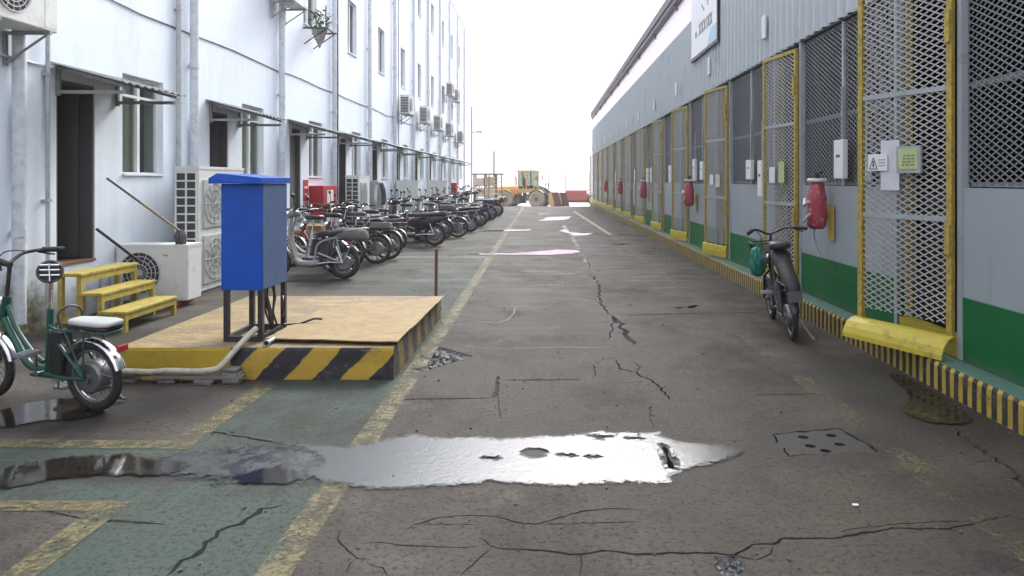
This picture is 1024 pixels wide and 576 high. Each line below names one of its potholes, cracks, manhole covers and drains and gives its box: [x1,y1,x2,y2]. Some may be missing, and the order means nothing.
crack [336,508,1024,576]
manhole cover [772,428,878,457]
pothole [413,346,472,371]
crack [394,224,670,426]
crack [0,507,164,525]
crack [191,428,282,443]
pothole [714,556,744,576]
crack [953,427,1024,487]
